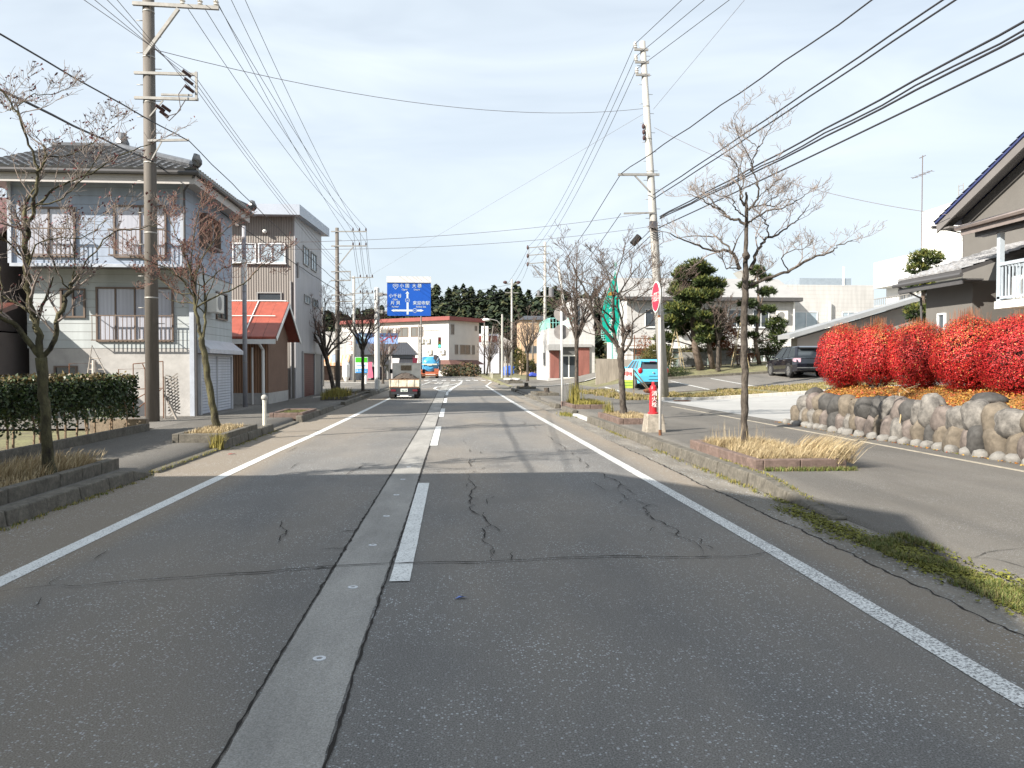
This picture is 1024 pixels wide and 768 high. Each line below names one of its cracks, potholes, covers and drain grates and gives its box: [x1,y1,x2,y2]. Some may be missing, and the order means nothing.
crack [4,428,812,591]
